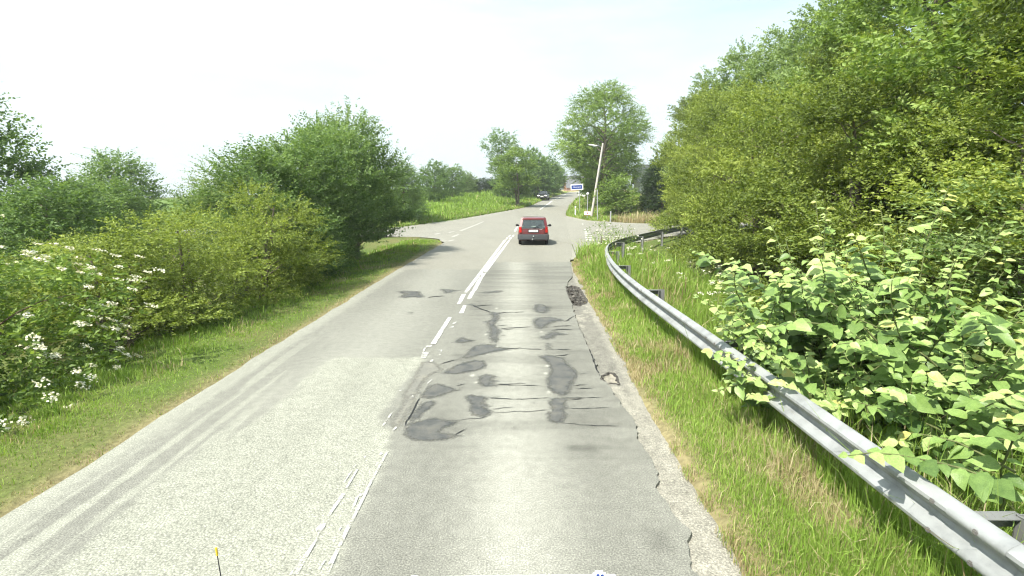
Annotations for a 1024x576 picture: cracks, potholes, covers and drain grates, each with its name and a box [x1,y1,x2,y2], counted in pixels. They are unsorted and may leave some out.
pothole [565,285,588,306]
pothole [600,372,620,384]
crack [454,317,612,436]
